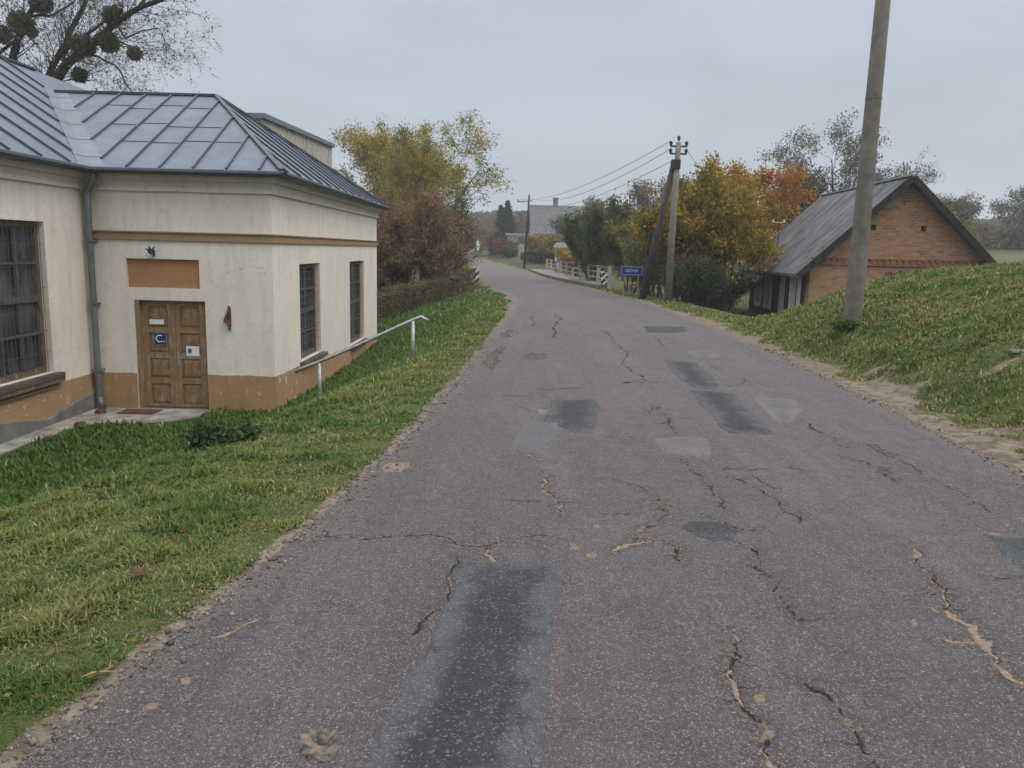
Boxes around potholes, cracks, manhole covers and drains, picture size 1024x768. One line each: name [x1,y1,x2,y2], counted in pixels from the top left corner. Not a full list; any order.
crack [723,634,779,768]
crack [603,331,657,383]
crack [299,529,530,635]
crack [796,681,879,768]
crack [808,423,921,482]
crack [911,549,1024,684]
crack [527,454,568,513]
crack [677,460,820,621]
